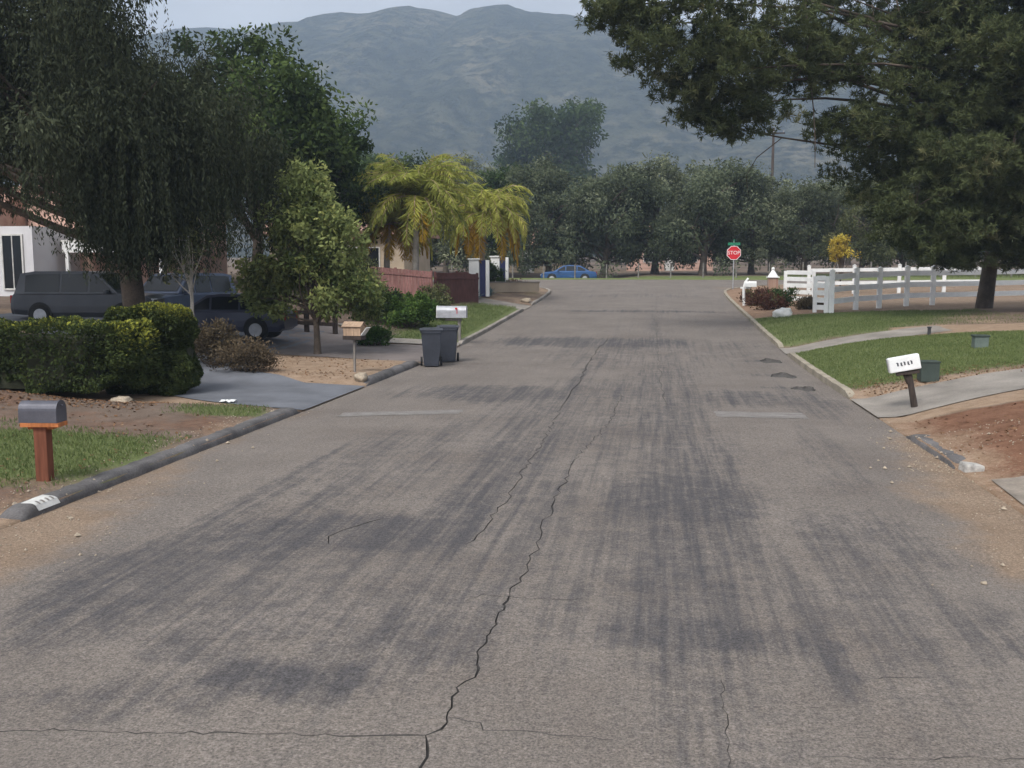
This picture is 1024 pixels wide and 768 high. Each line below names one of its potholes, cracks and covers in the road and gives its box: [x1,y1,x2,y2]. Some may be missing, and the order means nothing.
crack [0,339,622,768]
crack [720,681,731,766]
